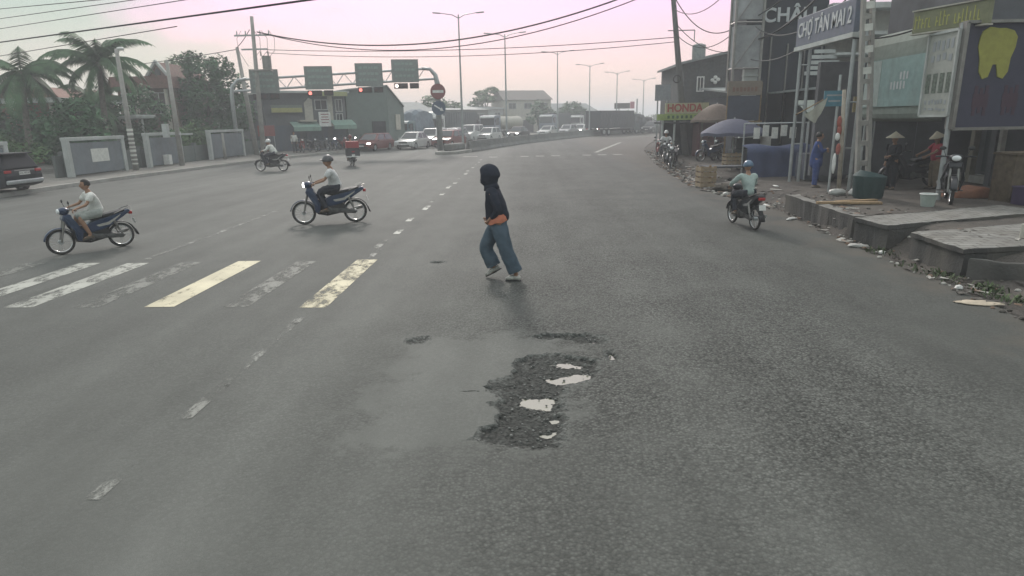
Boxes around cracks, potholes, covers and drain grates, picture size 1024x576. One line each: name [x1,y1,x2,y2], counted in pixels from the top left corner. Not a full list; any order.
pothole [527,332,611,345]
pothole [403,335,432,345]
pothole [467,352,604,451]
